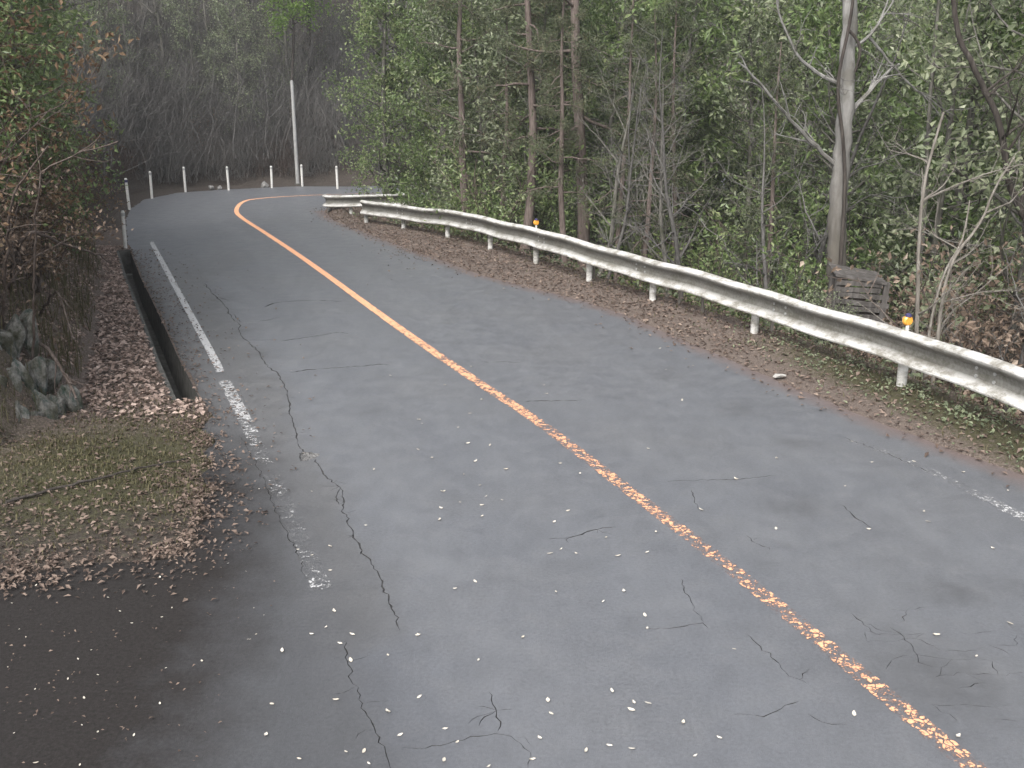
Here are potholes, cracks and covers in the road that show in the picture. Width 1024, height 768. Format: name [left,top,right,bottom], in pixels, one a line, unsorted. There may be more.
crack [206,285,399,626]
